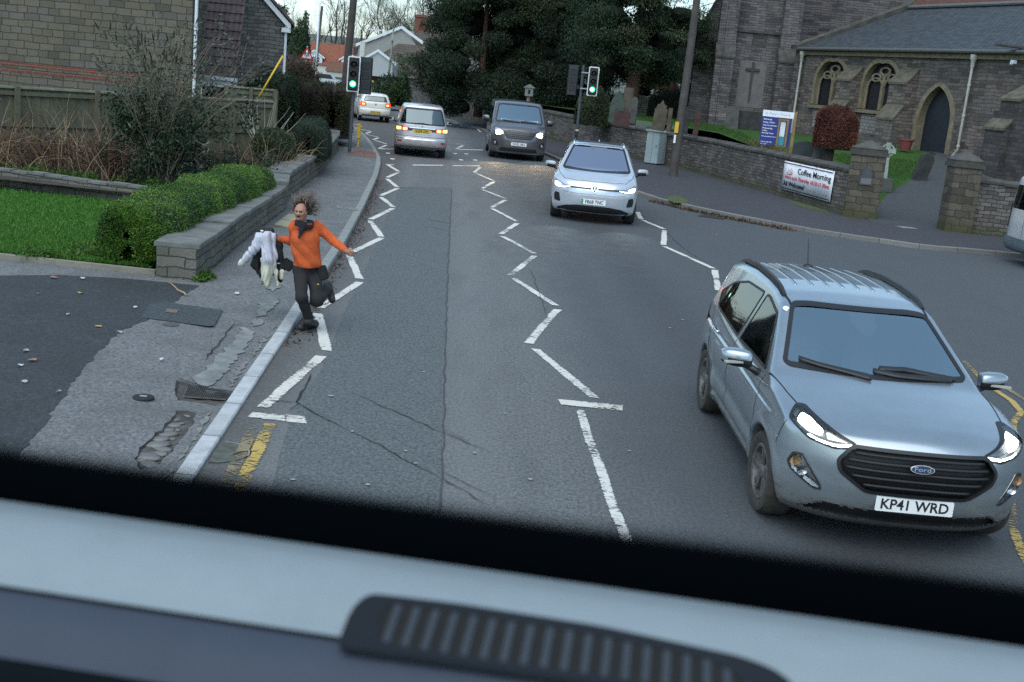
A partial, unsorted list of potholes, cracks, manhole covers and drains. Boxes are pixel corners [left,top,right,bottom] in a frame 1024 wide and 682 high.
crack [276,374,485,503]
pothole [135,410,197,470]
